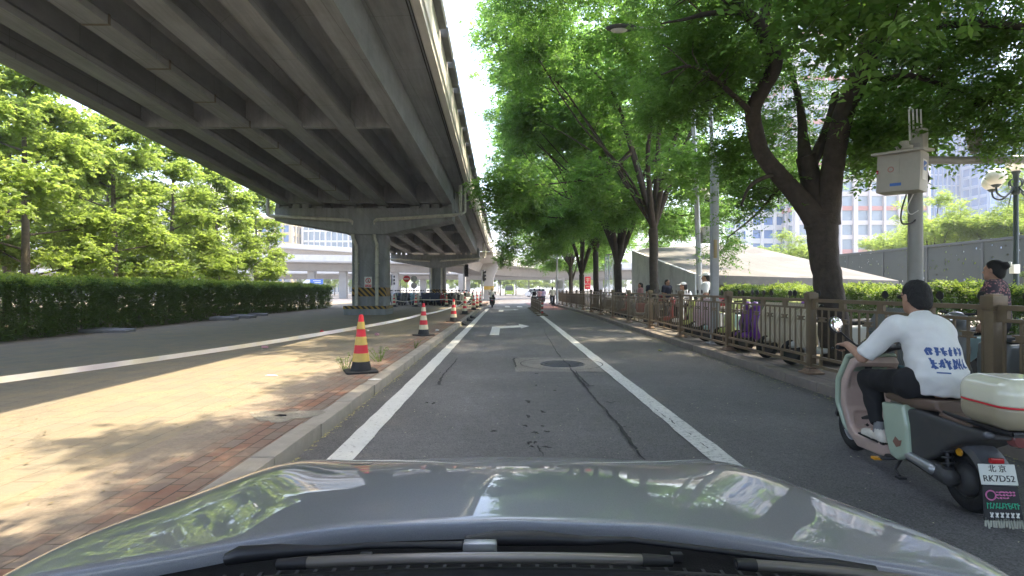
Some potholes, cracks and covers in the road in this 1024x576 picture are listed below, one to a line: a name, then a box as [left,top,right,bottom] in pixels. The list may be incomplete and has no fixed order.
crack [512,330,708,460]
